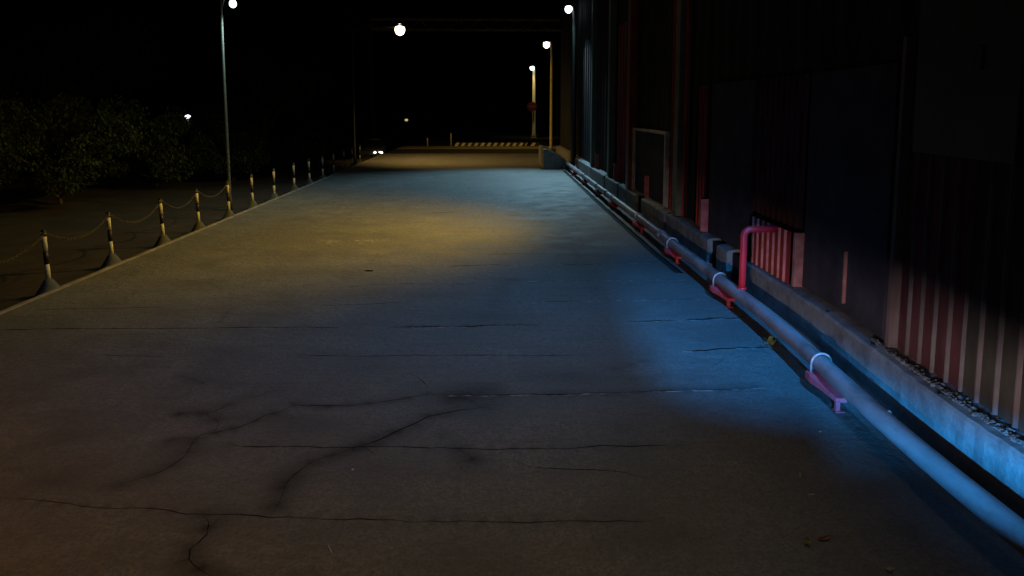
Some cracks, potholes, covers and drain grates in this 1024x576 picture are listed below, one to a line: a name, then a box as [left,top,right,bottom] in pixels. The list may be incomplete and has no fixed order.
crack [21,347,767,576]
crack [10,312,340,330]
